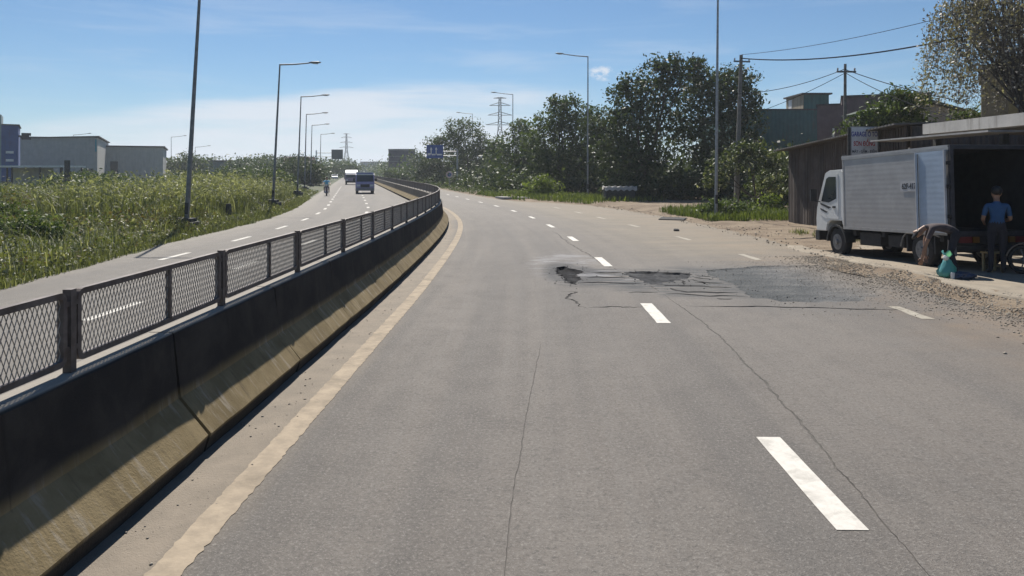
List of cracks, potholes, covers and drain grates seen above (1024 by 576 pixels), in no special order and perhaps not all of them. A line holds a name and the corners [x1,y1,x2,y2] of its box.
pothole [624,271,692,285]
crack [565,272,896,310]
pothole [555,266,583,285]
